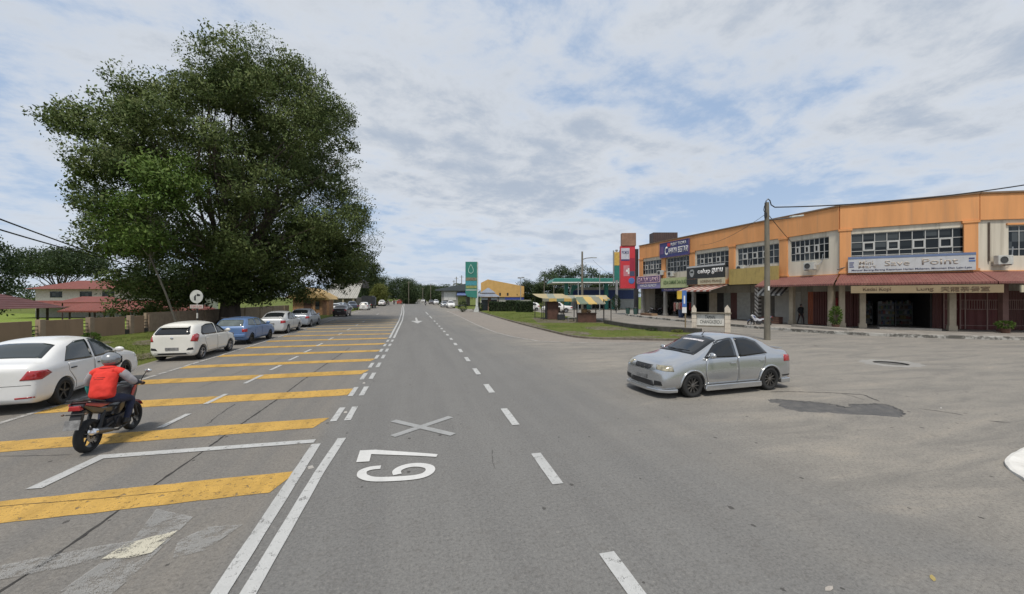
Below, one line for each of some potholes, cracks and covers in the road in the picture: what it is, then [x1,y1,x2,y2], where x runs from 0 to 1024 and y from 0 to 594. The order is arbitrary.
manhole cover [859,359,925,368]
